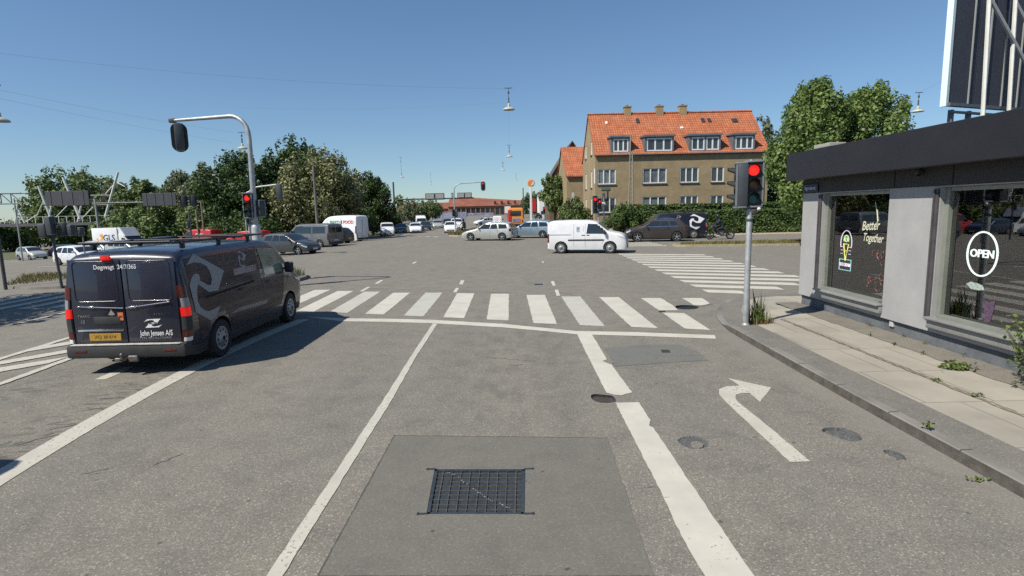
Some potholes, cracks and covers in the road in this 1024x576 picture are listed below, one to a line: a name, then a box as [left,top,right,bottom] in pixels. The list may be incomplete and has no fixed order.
pothole [884,450,907,460]
pothole [822,427,862,442]
